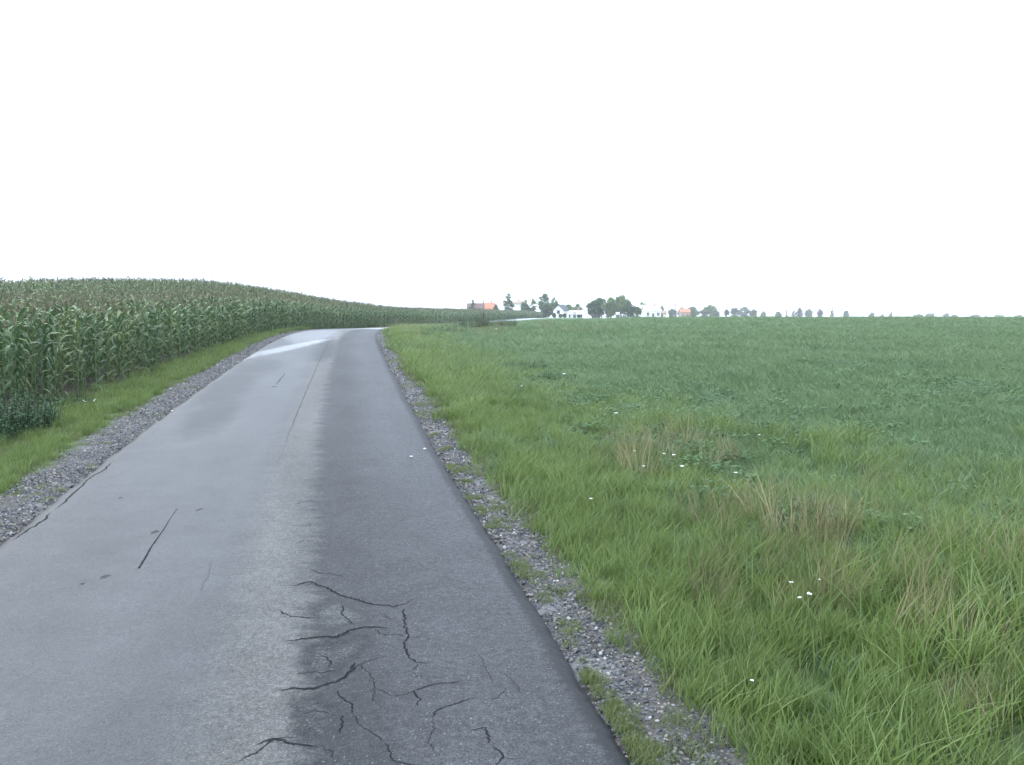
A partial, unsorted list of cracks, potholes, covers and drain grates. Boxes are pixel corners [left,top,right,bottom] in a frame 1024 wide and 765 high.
crack [12,449,121,541]
crack [239,570,472,765]
crack [473,727,519,765]
crack [478,655,520,701]
